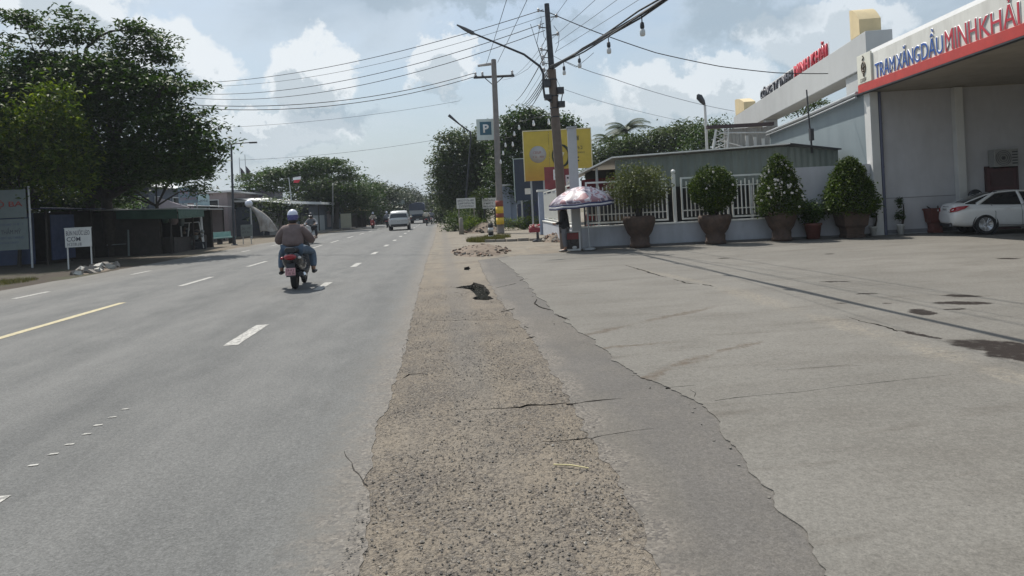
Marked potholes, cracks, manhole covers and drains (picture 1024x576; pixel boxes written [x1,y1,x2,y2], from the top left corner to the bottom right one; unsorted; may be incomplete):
crack [542,428,654,442]
crack [715,365,952,401]
crack [344,451,368,486]
pothole [456,282,493,300]
crack [468,399,612,410]
